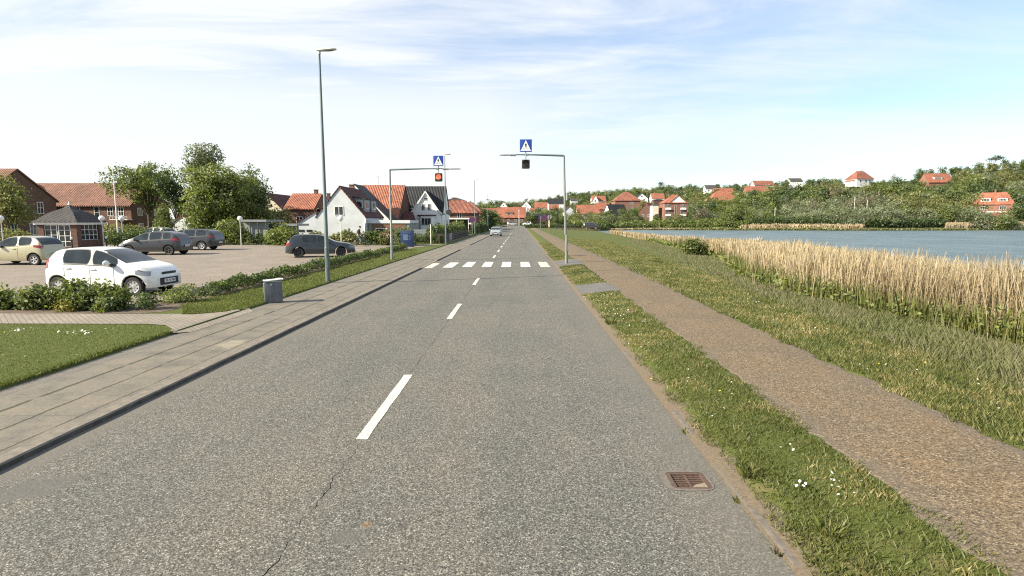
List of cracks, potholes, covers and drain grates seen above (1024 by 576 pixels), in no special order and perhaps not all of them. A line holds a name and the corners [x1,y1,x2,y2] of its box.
drain grate [659,470,714,491]
crack [263,443,360,576]
